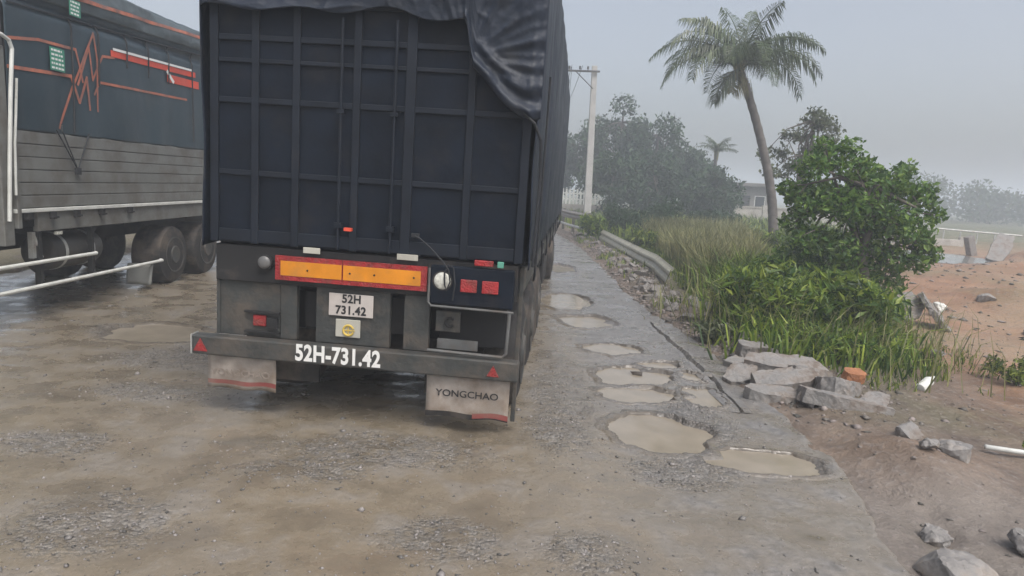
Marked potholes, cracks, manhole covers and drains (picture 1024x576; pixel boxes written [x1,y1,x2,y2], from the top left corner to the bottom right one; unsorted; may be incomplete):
pothole [674,385,731,412]
pothole [586,364,683,390]
pothole [688,445,842,481]
crack [644,321,753,414]
pothole [575,342,651,359]
pothole [584,384,696,405]
pothole [540,291,599,313]
pothole [552,263,579,274]
pothole [86,321,225,346]
pothole [594,409,729,460]
pothole [550,313,626,330]
pothole [631,359,685,370]
